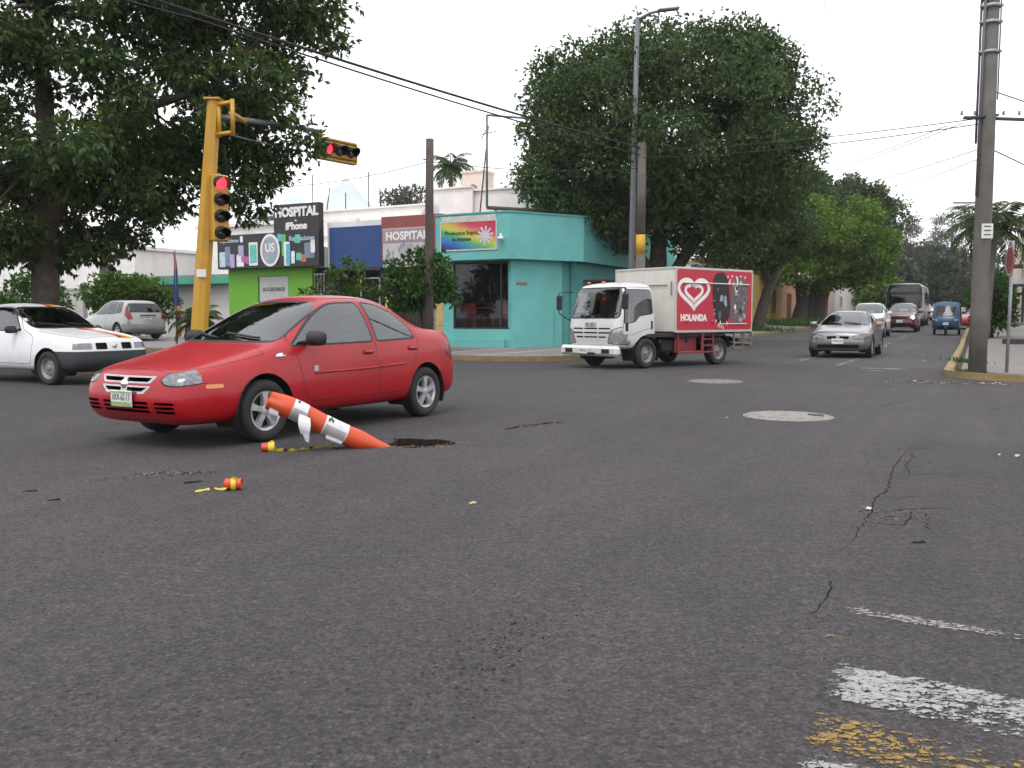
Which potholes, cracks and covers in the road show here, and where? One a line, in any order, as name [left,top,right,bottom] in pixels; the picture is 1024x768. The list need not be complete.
crack [810,572,833,621]
pothole [387,438,454,448]
manhole cover [743,411,834,421]
crack [845,448,971,549]
